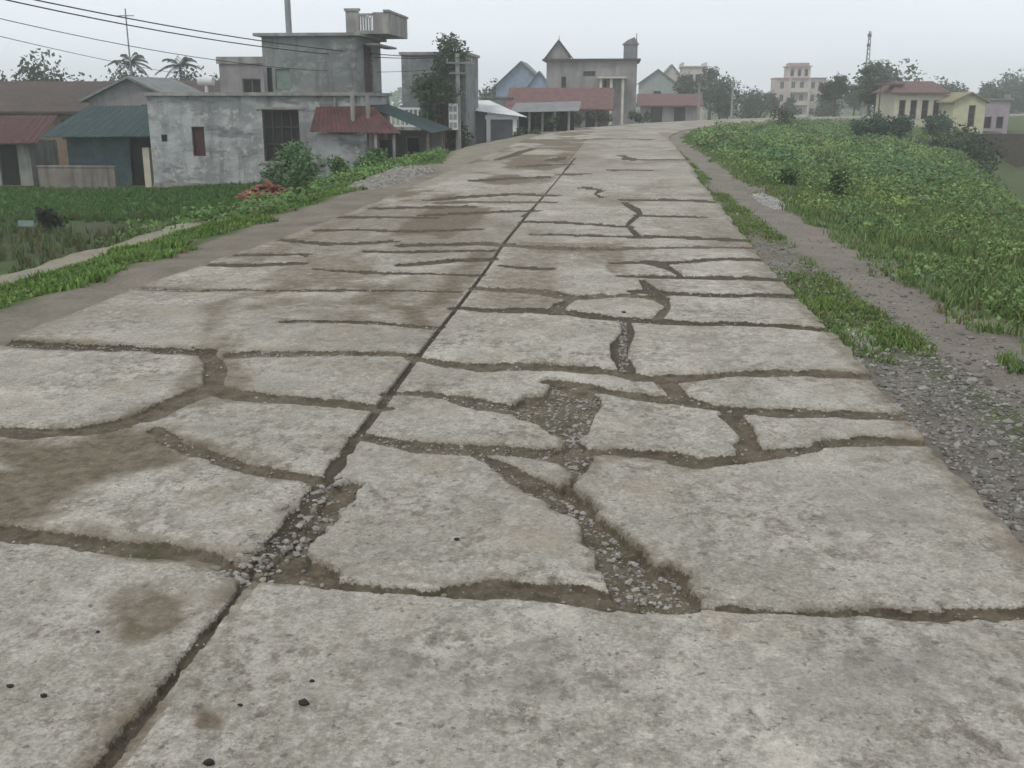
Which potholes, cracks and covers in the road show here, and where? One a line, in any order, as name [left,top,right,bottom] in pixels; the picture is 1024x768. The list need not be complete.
crack [607,256,762,265]
crack [369,434,569,464]
crack [613,263,780,282]
crack [394,257,500,267]
crack [0,353,397,440]
crack [278,318,436,330]
crack [578,187,606,198]
crack [626,278,798,301]
crack [446,306,828,332]
crack [223,349,412,359]
crack [277,238,400,246]
